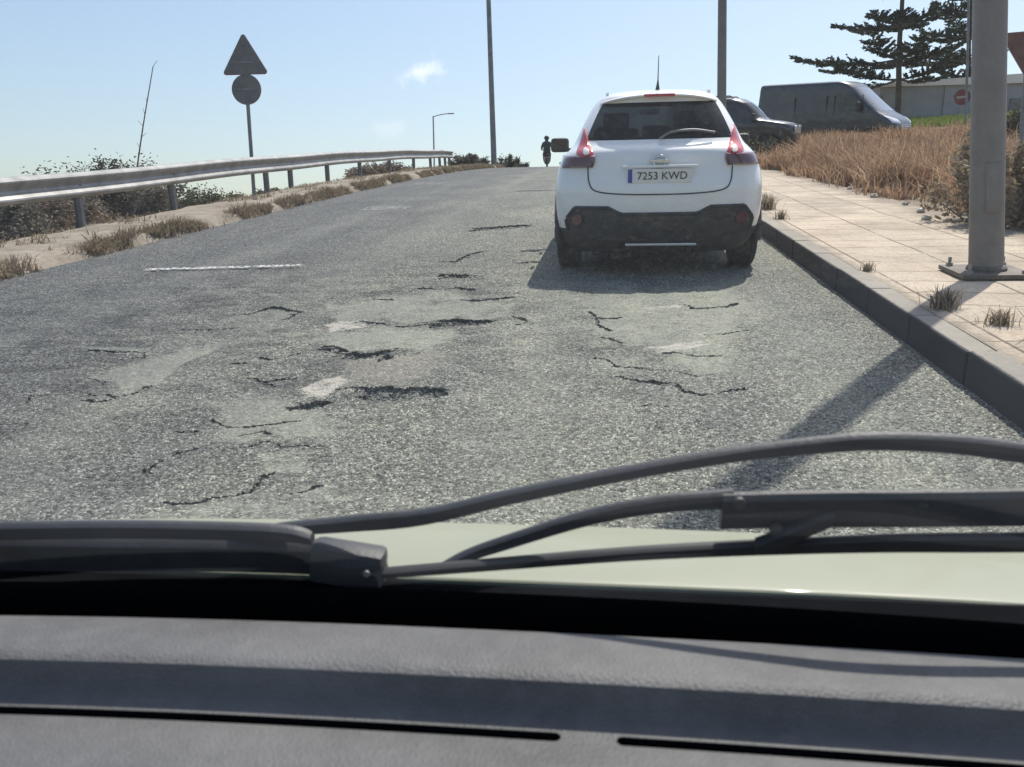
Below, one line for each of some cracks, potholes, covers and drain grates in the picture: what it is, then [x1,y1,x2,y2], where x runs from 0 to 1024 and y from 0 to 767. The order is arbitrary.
pothole [422,318,497,329]
pothole [284,400,334,411]
pothole [318,345,399,362]
crack [180,306,303,331]
crack [87,349,147,359]
pothole [354,385,449,402]
crack [80,377,153,403]
crack [163,472,324,506]
crack [588,311,746,407]
